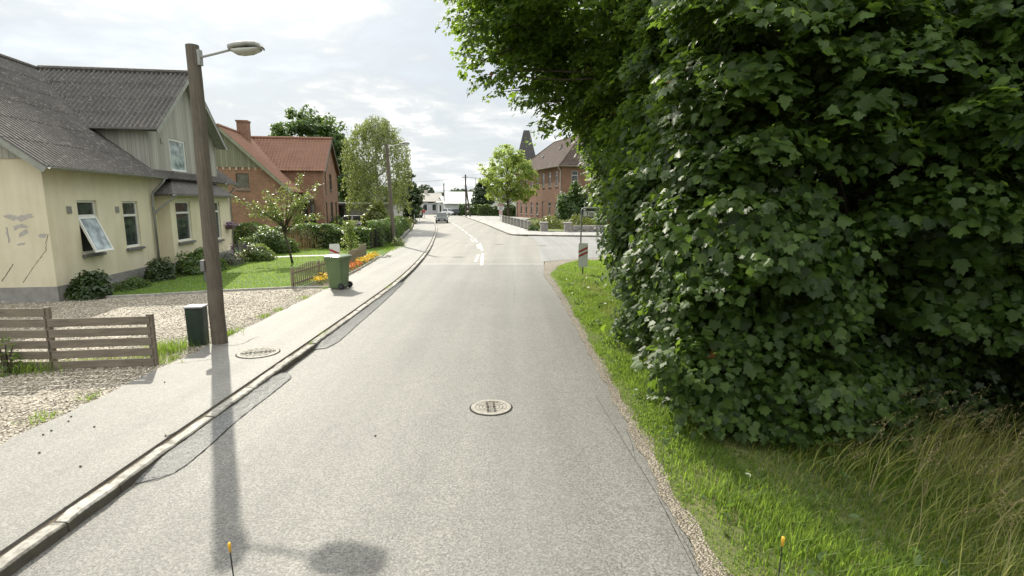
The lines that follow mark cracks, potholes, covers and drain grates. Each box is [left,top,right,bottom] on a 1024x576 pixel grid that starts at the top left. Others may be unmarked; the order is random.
manhole cover [235,347,281,359]
manhole cover [469,399,513,416]
